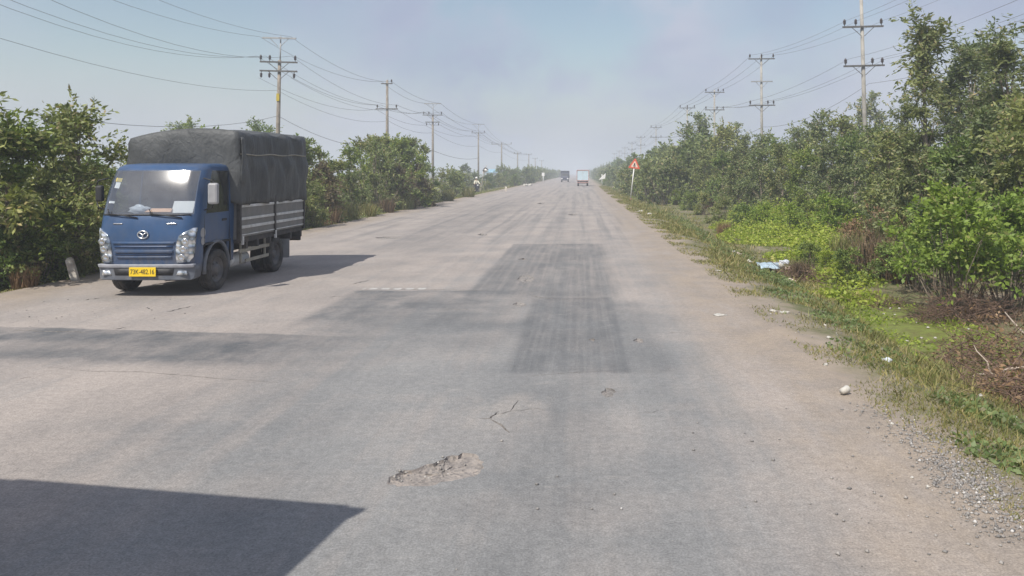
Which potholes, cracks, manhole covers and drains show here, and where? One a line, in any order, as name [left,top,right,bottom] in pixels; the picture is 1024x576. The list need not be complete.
crack [480,401,542,433]
pothole [387,453,484,487]
crack [51,367,264,382]
